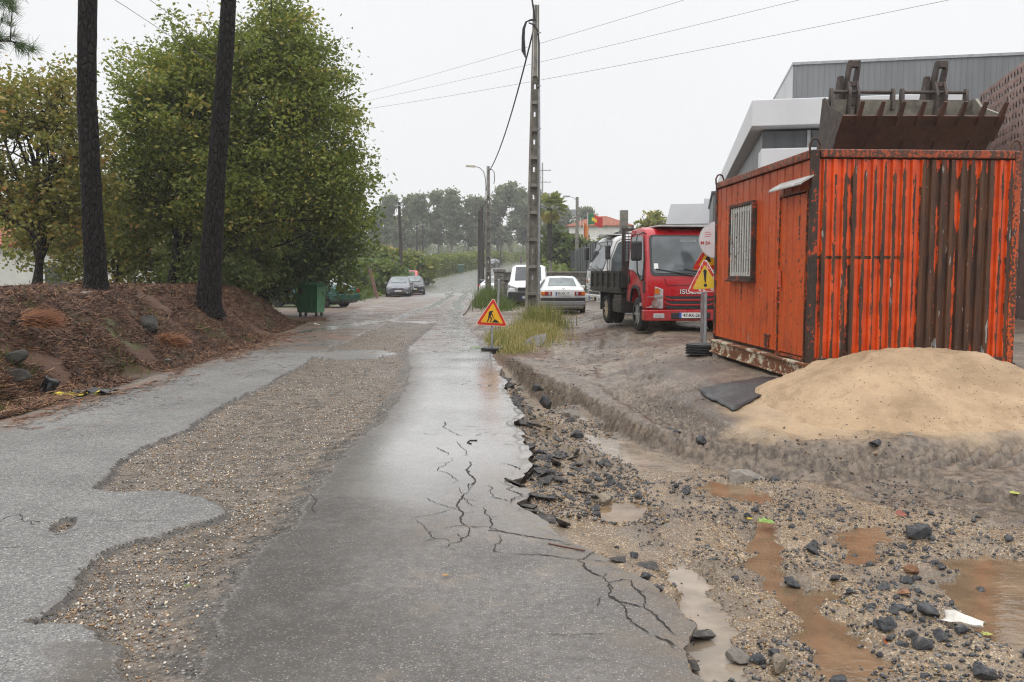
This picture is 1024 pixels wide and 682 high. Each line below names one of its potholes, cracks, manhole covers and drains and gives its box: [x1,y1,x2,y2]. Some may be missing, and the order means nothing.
crack [411,422,676,646]
